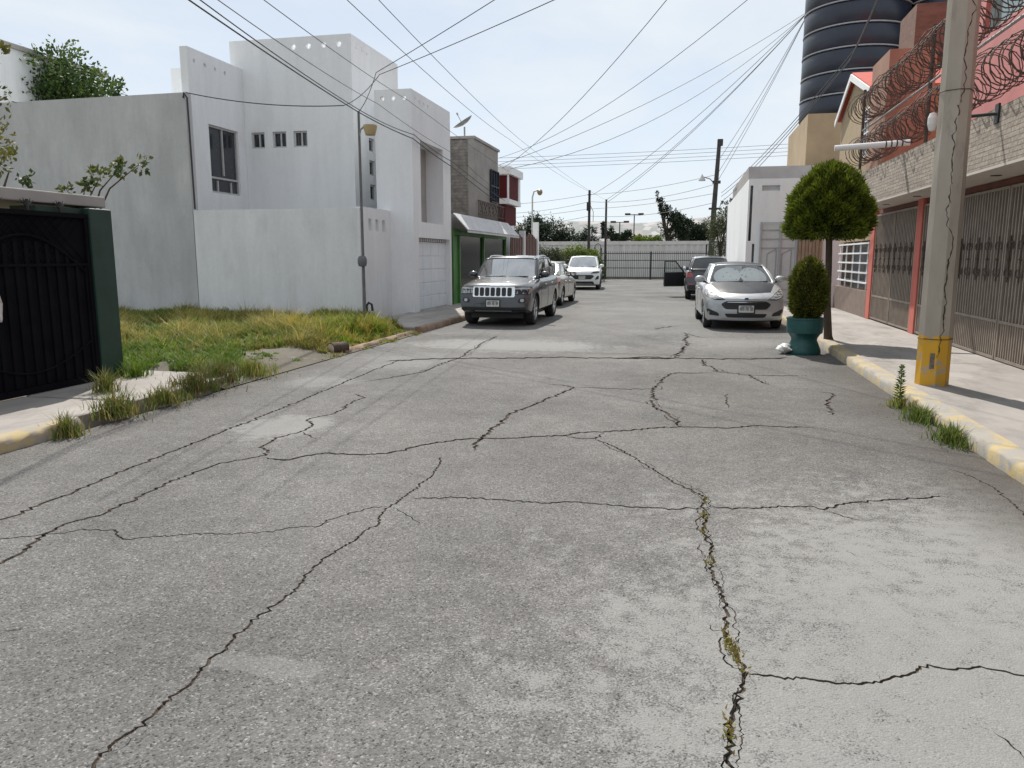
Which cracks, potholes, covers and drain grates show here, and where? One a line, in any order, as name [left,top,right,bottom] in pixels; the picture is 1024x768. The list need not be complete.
crack [0,326,1024,768]
